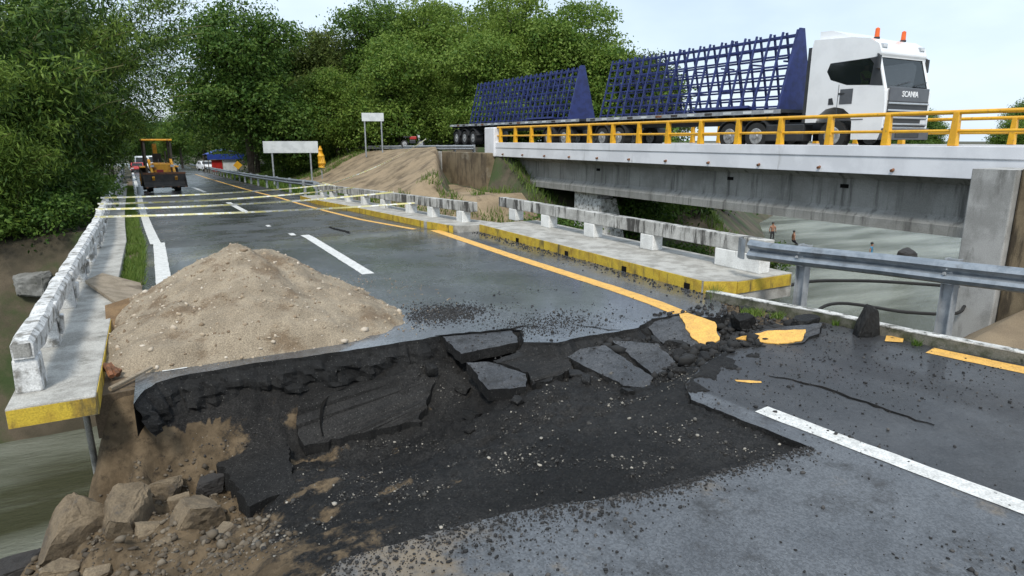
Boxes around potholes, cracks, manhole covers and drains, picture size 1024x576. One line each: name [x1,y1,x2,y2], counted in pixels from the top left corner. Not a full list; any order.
crack [771,376,935,425]
